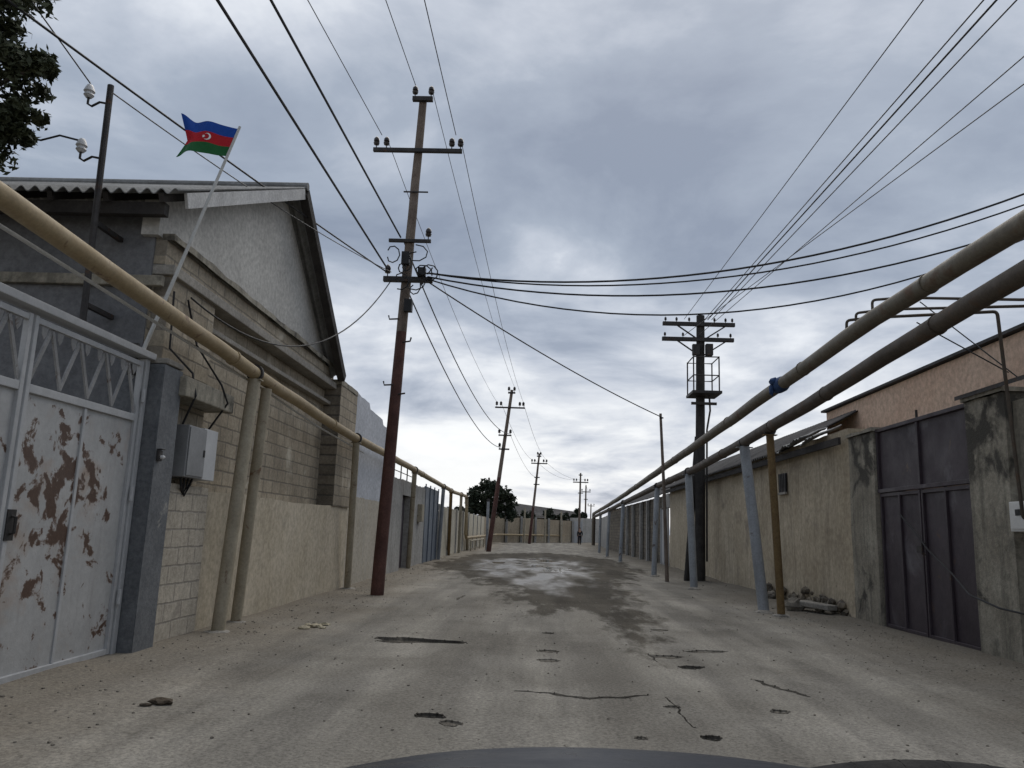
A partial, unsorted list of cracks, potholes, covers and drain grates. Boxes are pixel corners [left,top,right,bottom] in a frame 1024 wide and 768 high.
crack [514,690,696,728]
pothole [372,636,468,644]
crack [751,679,810,697]
